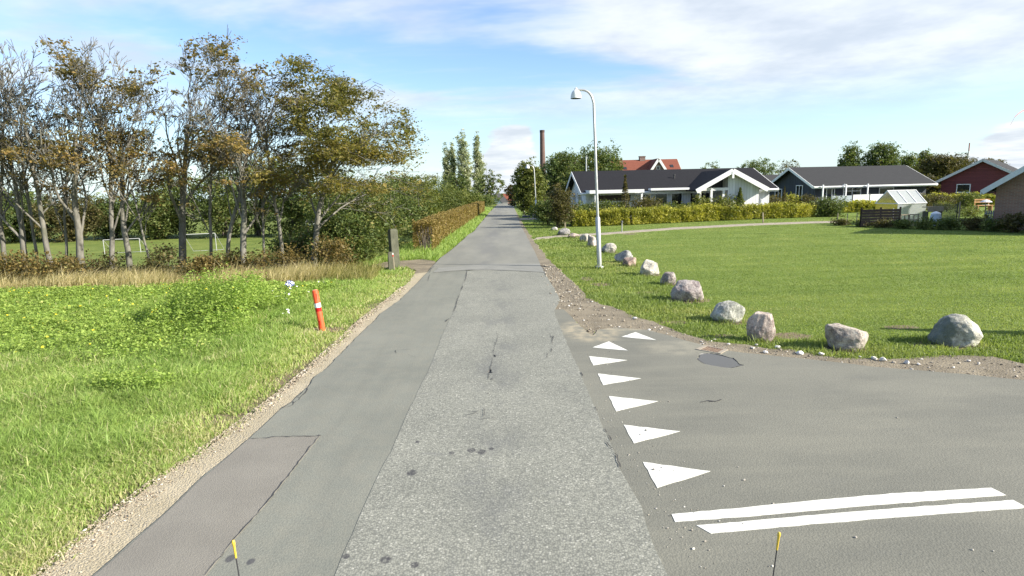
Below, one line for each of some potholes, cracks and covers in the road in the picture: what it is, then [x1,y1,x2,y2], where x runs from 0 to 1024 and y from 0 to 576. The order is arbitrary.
pothole [697,353,742,368]
